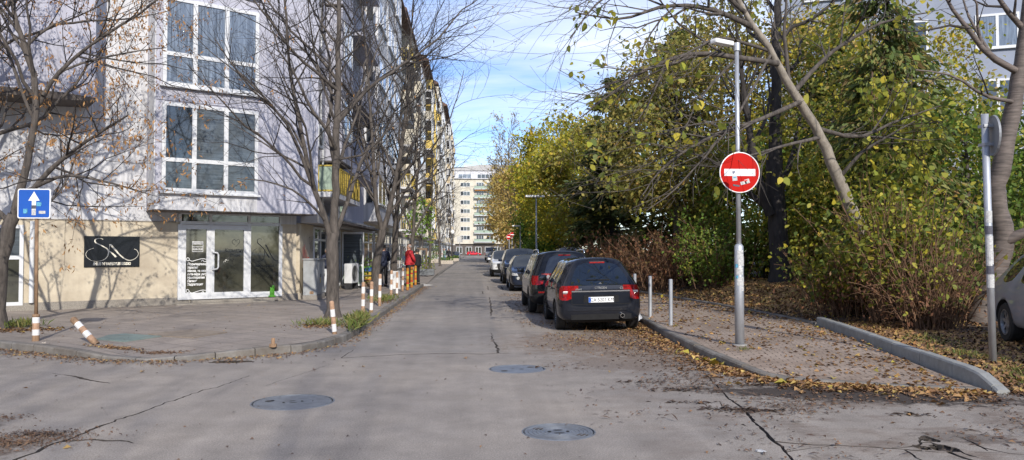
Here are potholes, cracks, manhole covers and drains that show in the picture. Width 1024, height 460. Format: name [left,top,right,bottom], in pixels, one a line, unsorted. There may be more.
crack [13,376,248,460]
crack [53,373,108,383]
manhole cover [489,365,546,373]
manhole cover [250,394,335,410]
manhole cover [522,423,596,441]
